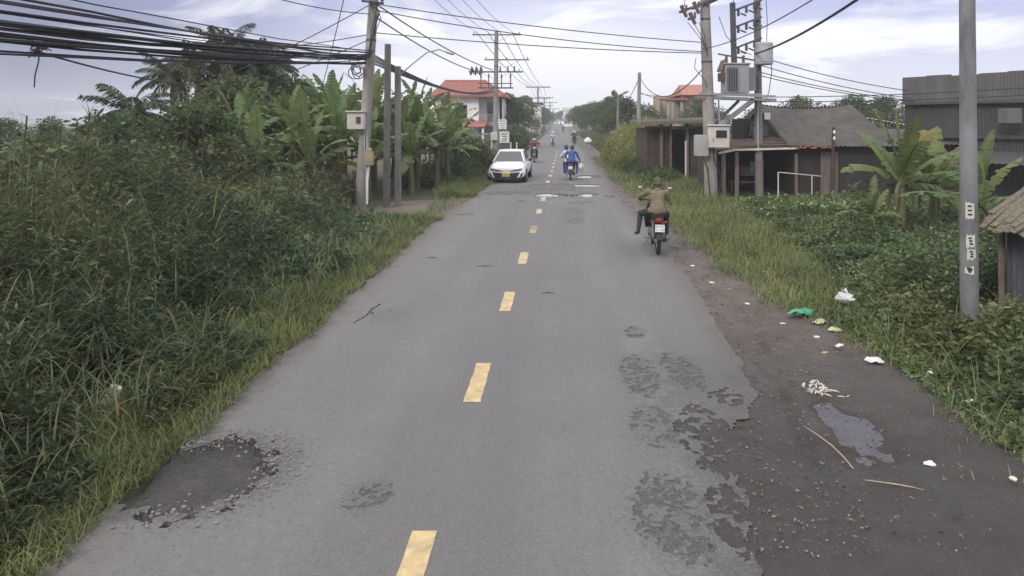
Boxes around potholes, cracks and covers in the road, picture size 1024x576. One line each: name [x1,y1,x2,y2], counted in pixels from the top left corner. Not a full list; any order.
pothole [628,406,680,449]
pothole [659,351,707,392]
pothole [672,402,740,480]
pothole [619,354,660,399]
pothole [707,385,744,406]
pothole [117,433,281,529]
pothole [627,468,717,567]
pothole [340,483,396,509]
